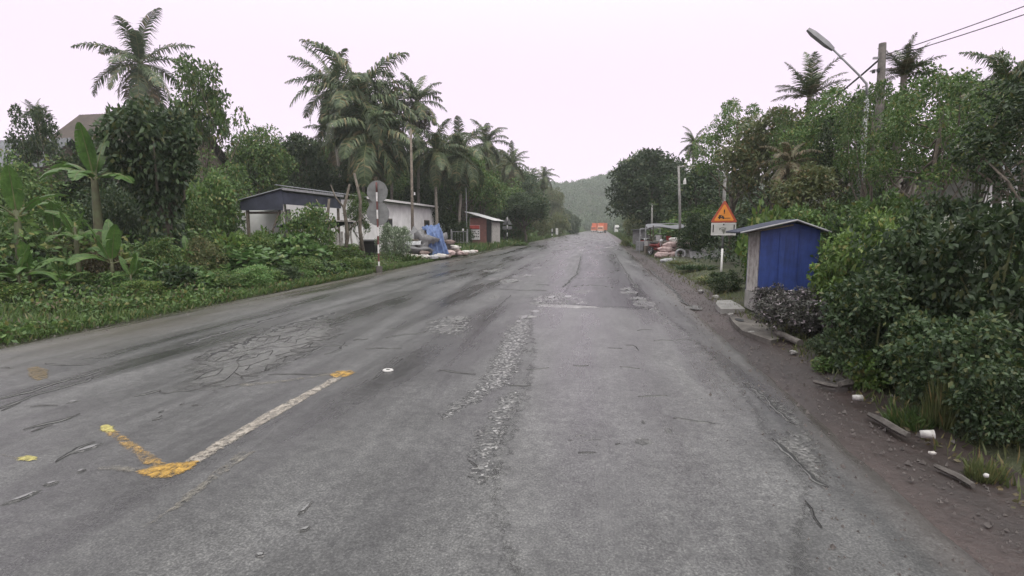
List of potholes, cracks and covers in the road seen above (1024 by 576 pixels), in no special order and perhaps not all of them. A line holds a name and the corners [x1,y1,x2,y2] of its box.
crack [751,387,829,528]
crack [134,312,426,420]
